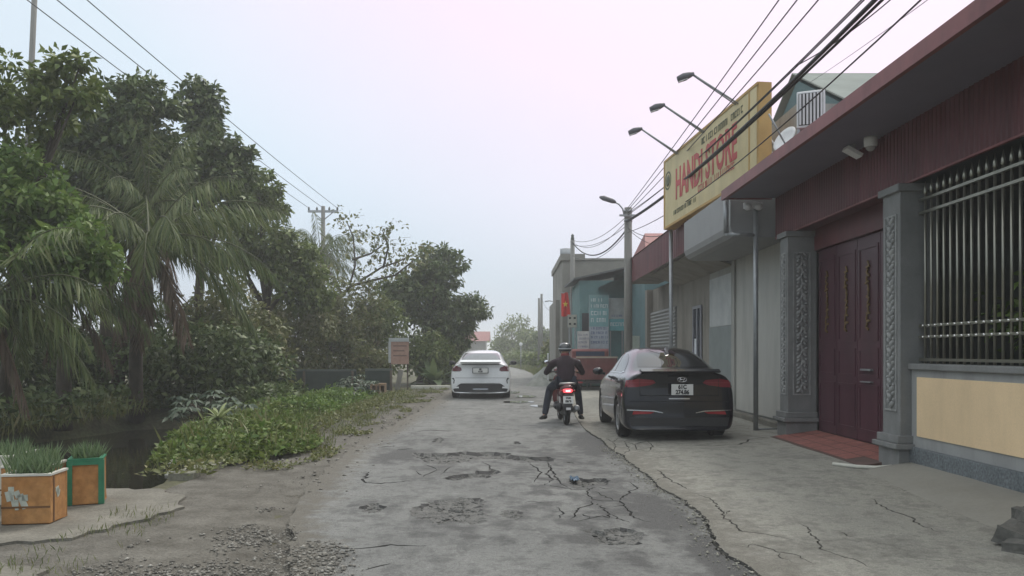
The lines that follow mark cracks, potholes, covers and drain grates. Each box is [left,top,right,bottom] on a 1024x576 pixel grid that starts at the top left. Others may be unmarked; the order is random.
pothole [358,503,387,513]
pothole [409,497,488,525]
crack [361,446,491,484]
pothole [443,469,502,480]
pothole [582,527,649,545]
crack [341,544,415,570]
pothole [411,451,554,465]
crack [874,489,940,537]
crack [517,430,866,573]
